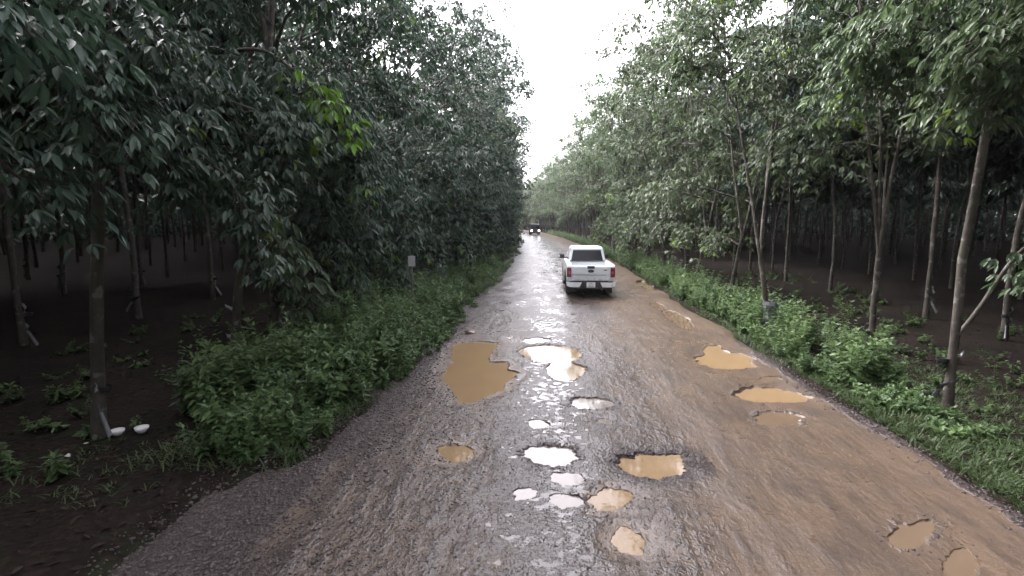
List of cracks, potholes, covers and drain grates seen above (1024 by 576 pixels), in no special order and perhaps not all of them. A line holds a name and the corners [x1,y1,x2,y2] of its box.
pothole [549,493,585,509]
pothole [661,310,695,331]
pothole [528,419,550,428]
pothole [731,385,814,403]
pothole [941,547,981,576]
pothole [887,519,938,550]
pothole [512,487,538,501]
pothole [610,525,646,556]
pothole [636,280,658,291]
pothole [436,443,475,464]
pothole [693,345,757,370]
pothole [613,451,687,480]
